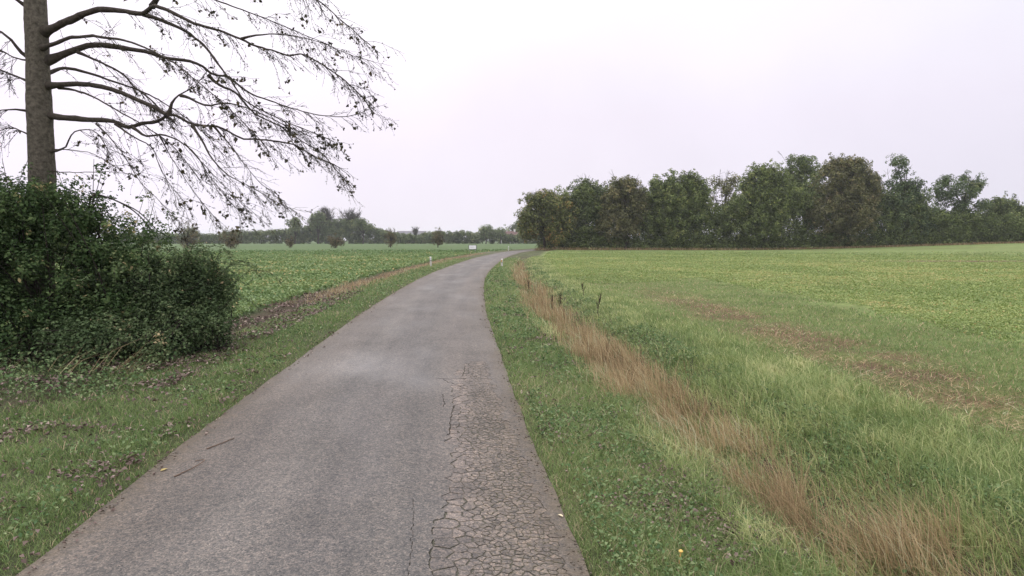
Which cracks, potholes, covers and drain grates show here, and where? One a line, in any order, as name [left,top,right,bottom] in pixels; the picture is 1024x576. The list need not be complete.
crack [408,361,570,576]
